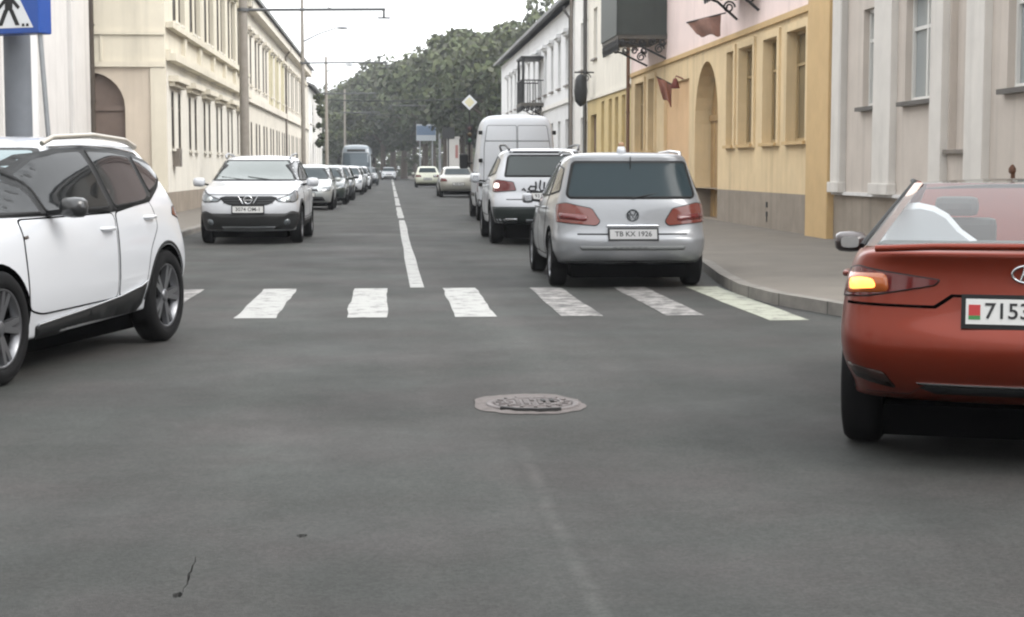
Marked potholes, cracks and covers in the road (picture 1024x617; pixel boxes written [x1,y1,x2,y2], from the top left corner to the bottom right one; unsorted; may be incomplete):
manhole cover [475,394,586,414]
